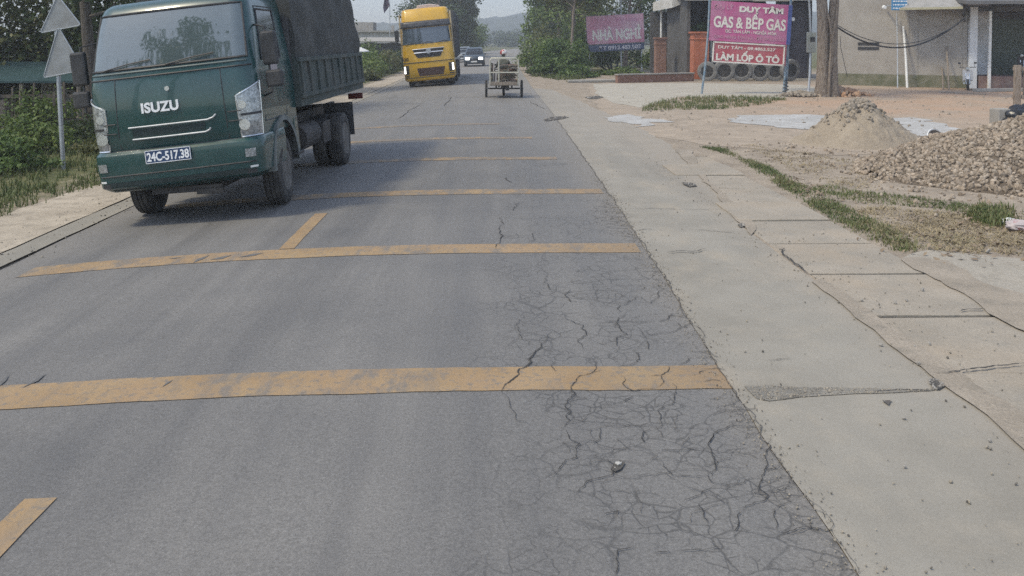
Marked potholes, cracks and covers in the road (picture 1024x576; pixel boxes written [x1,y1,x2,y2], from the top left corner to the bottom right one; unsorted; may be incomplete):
crack [502,315,553,422]
crack [545,265,836,552]
